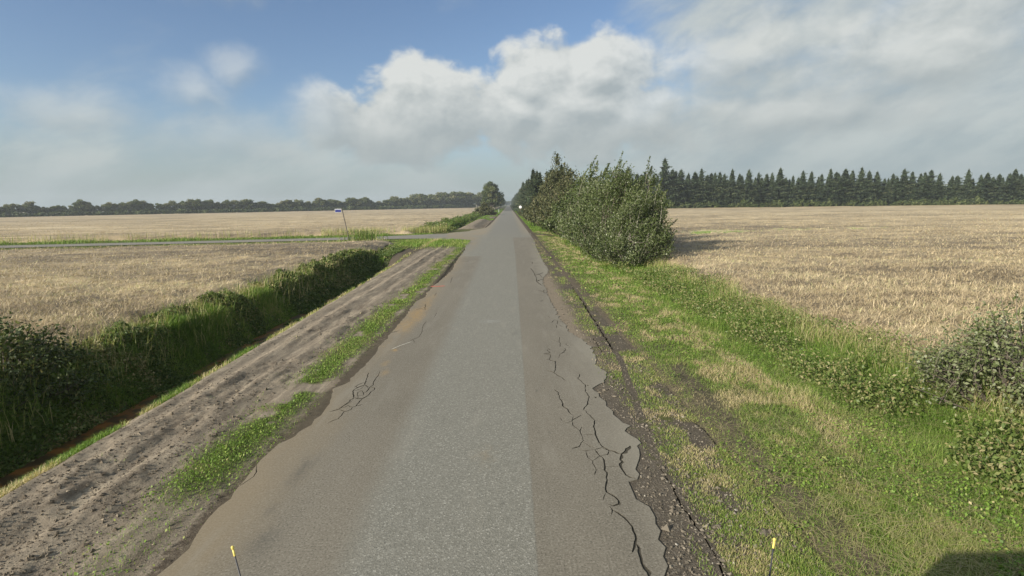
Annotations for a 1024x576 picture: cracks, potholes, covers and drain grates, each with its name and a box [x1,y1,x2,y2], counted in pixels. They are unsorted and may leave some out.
crack [333,372,380,421]
crack [531,263,652,576]
